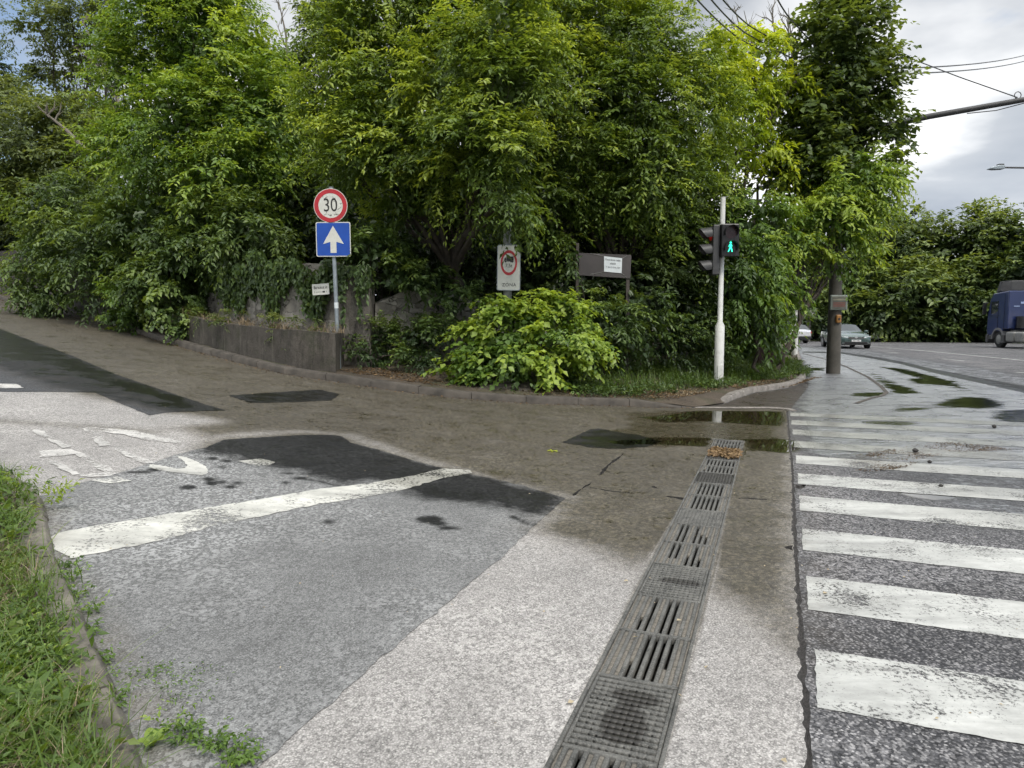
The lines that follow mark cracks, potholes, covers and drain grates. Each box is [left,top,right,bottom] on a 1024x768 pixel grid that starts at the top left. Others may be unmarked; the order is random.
drain grate [699,458,738,475]
drain grate [597,593,701,692]
crack [590,453,630,493]
drain grate [712,439,743,449]
drain grate [551,742,658,768]
drain grate [654,522,720,571]
drain grate [682,481,732,513]
